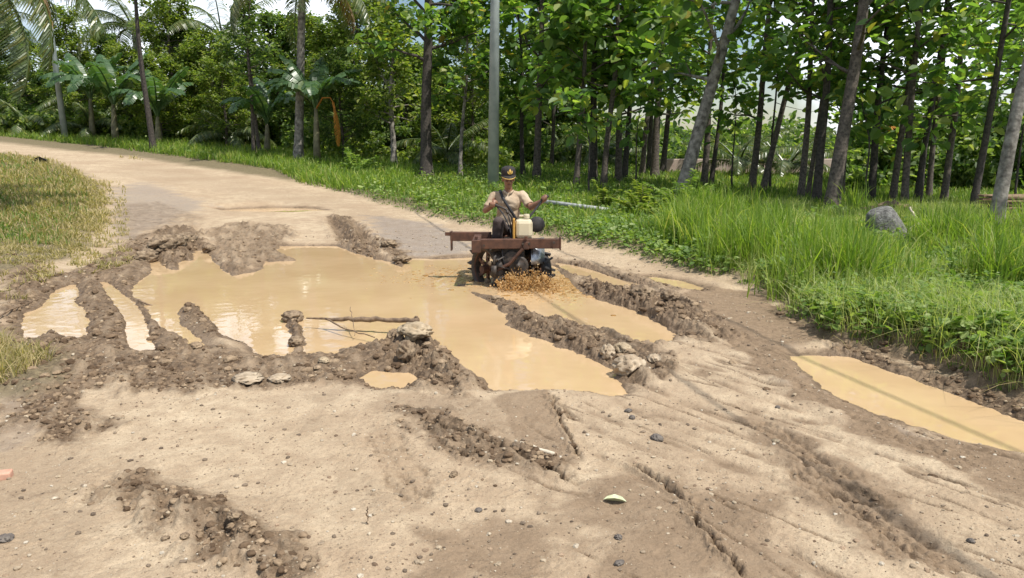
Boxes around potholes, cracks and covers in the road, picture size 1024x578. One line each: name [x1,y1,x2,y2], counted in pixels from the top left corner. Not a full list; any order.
pothole [92,273,168,351]
pothole [125,241,642,397]
pothole [8,278,103,341]
pothole [779,345,1024,453]
pothole [641,273,713,291]
